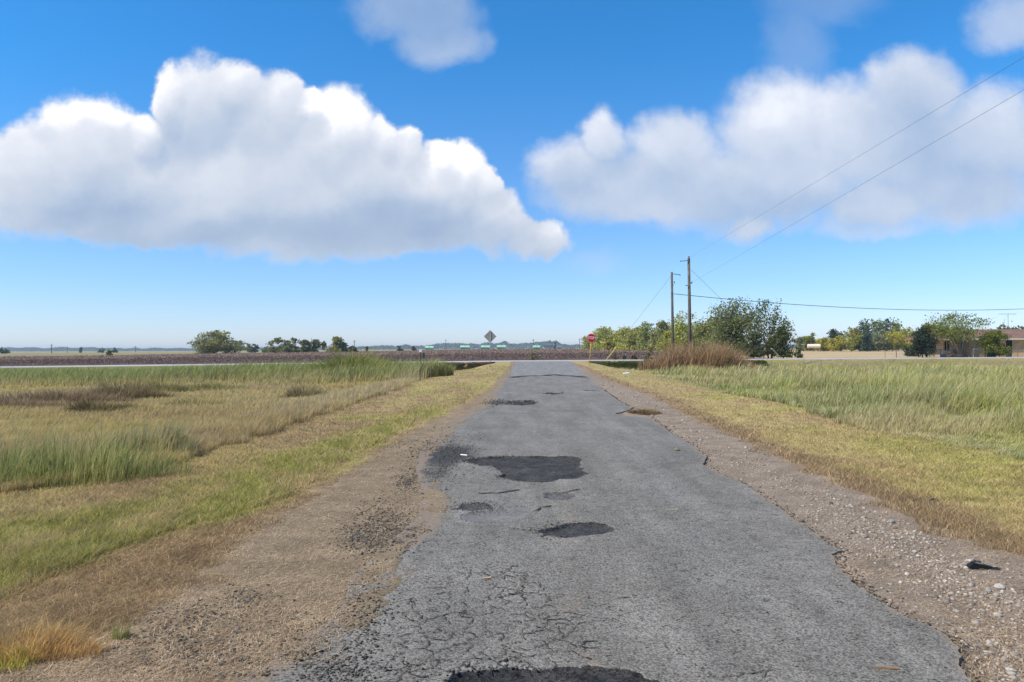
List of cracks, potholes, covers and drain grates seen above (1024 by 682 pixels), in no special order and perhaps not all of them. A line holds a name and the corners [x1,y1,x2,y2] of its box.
pothole [456,503,492,511]
crack [481,489,579,512]
crack [383,567,598,682]
